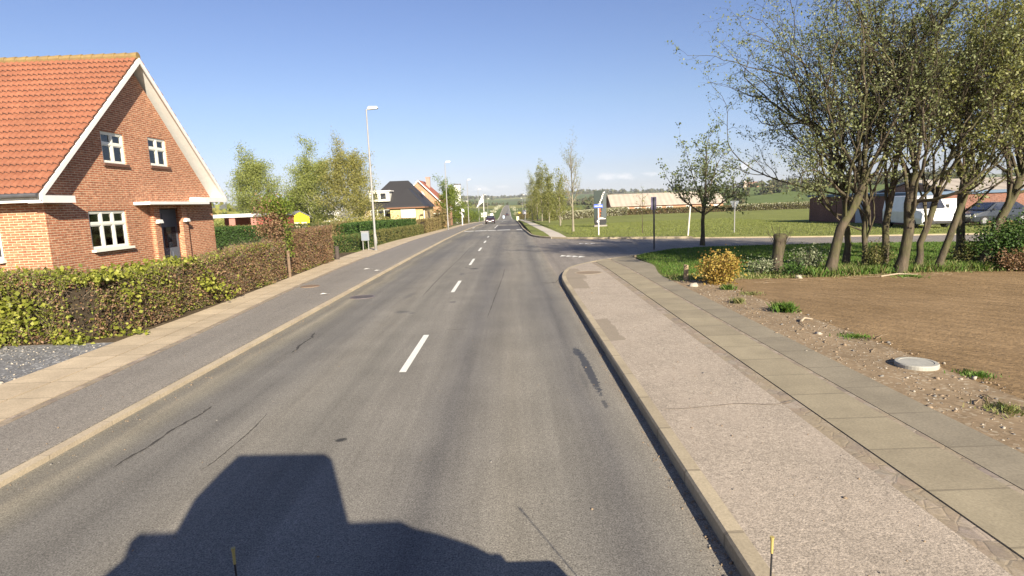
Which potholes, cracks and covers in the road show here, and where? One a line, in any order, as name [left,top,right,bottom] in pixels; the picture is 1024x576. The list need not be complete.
manhole cover [894,357,940,371]
